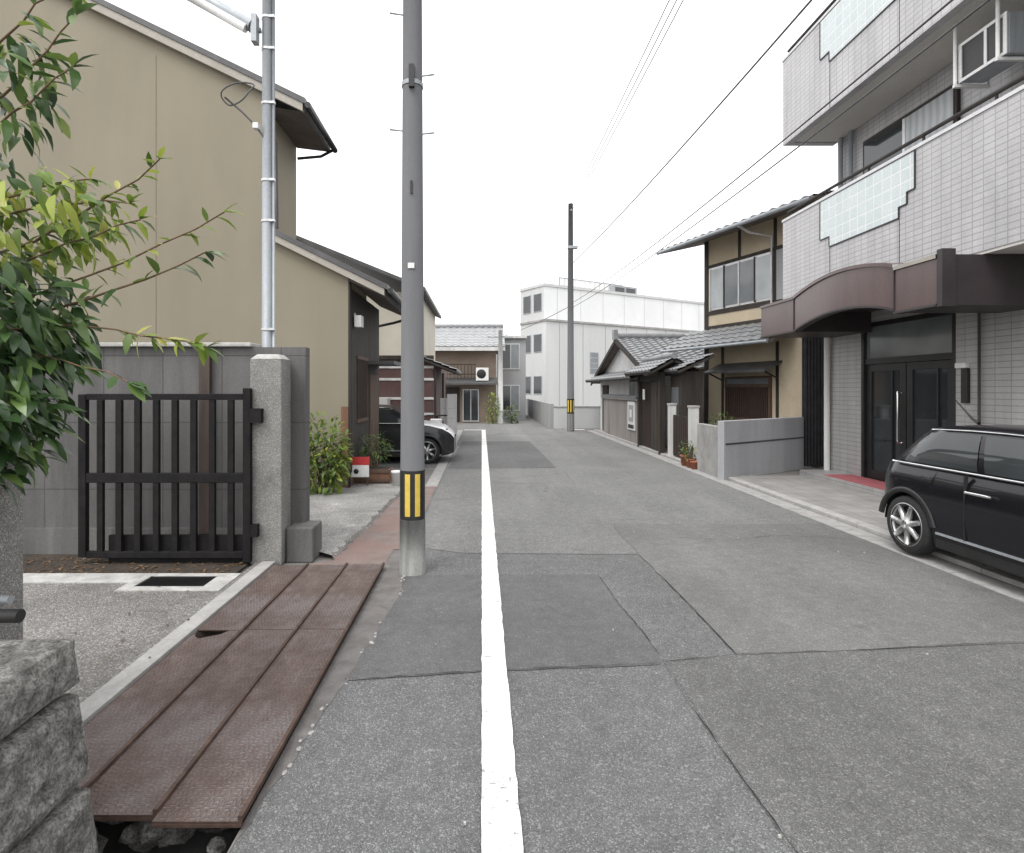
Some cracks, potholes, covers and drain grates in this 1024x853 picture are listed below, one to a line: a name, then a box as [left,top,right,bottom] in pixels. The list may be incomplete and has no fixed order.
drain grate [137,576,217,586]
